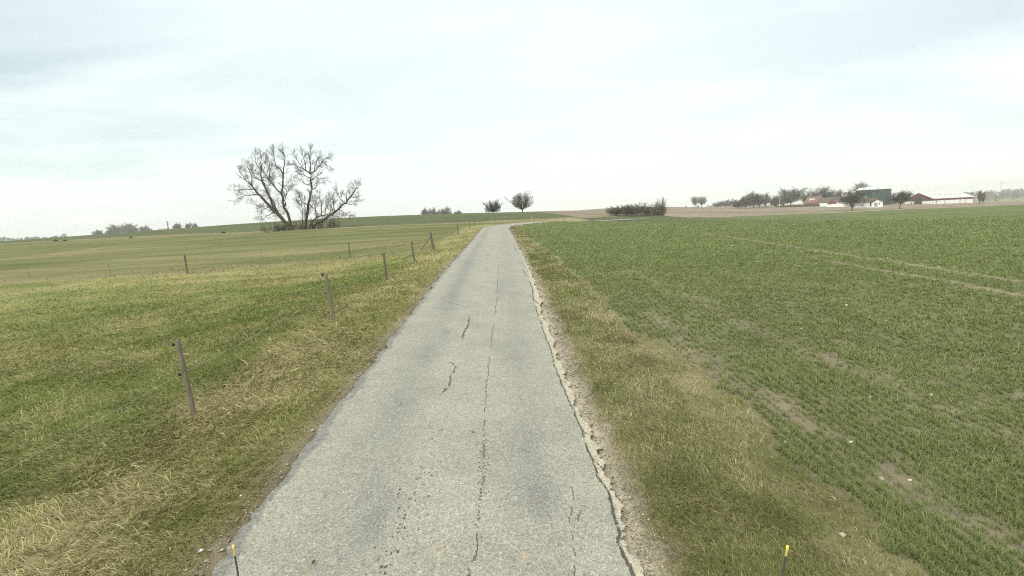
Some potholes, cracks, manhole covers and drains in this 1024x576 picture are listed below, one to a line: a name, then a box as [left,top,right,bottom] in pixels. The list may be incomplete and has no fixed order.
crack [523,270,635,576]
crack [467,270,499,576]
crack [442,362,457,393]
